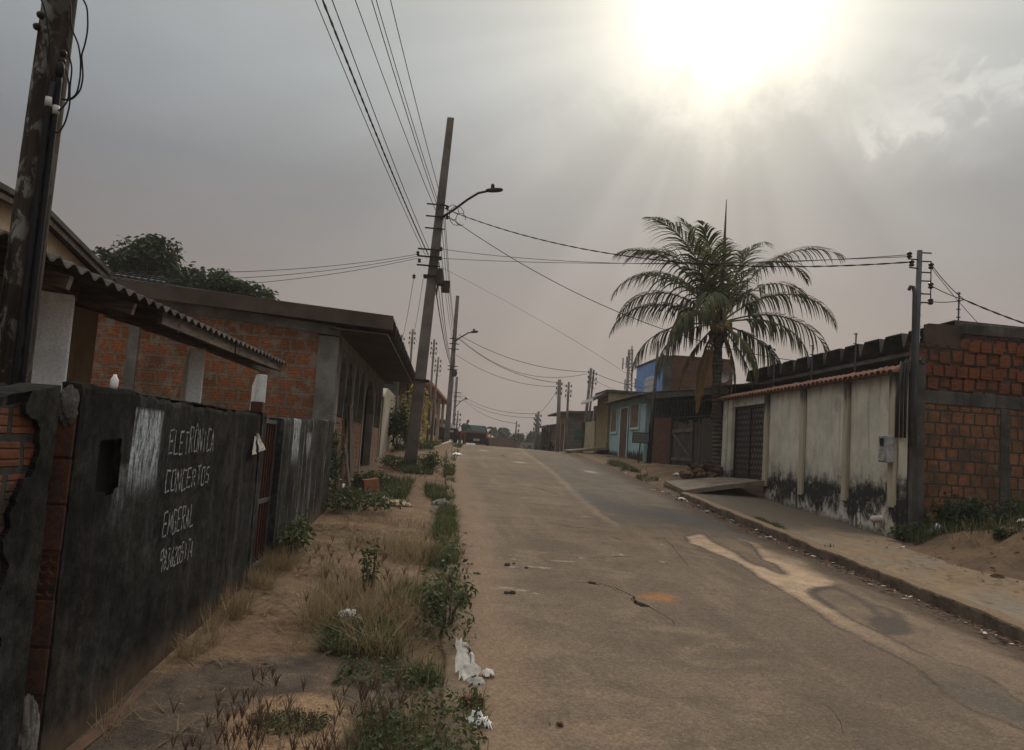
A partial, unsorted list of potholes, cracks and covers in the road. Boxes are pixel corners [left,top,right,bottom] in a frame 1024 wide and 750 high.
crack [573,582,675,625]
